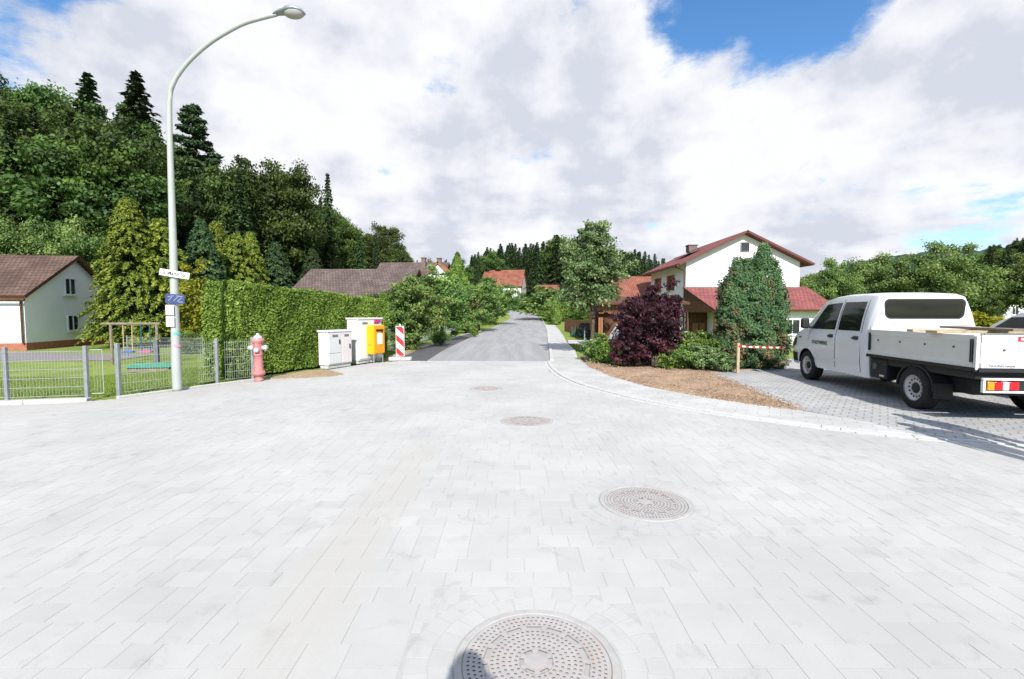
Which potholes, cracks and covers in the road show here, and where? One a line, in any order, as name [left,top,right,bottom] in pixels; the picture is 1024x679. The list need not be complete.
manhole cover [501,415,552,427]
manhole cover [599,485,693,522]
manhole cover [453,610,621,679]
